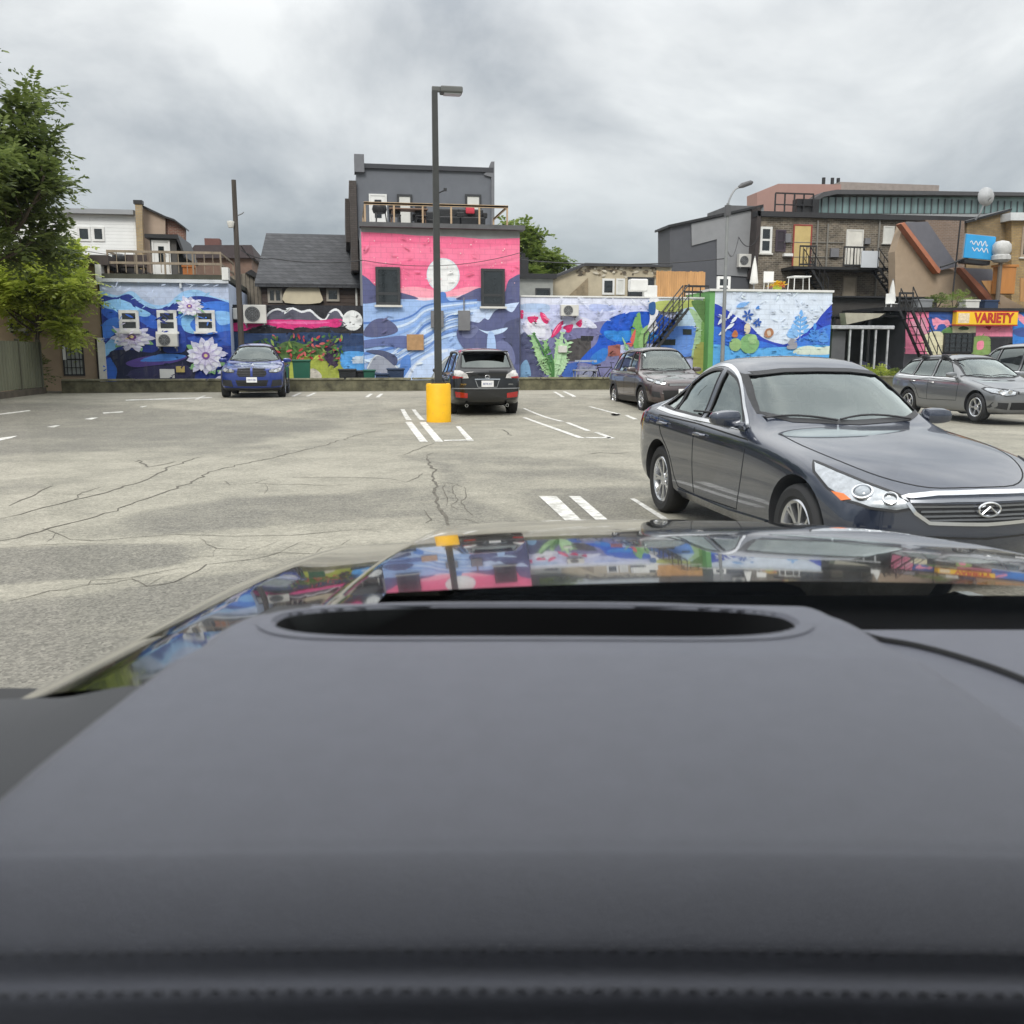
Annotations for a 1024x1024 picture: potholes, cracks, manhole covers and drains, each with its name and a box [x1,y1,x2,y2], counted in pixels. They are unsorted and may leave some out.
crack [404,444,478,525]
crack [1,431,396,603]
